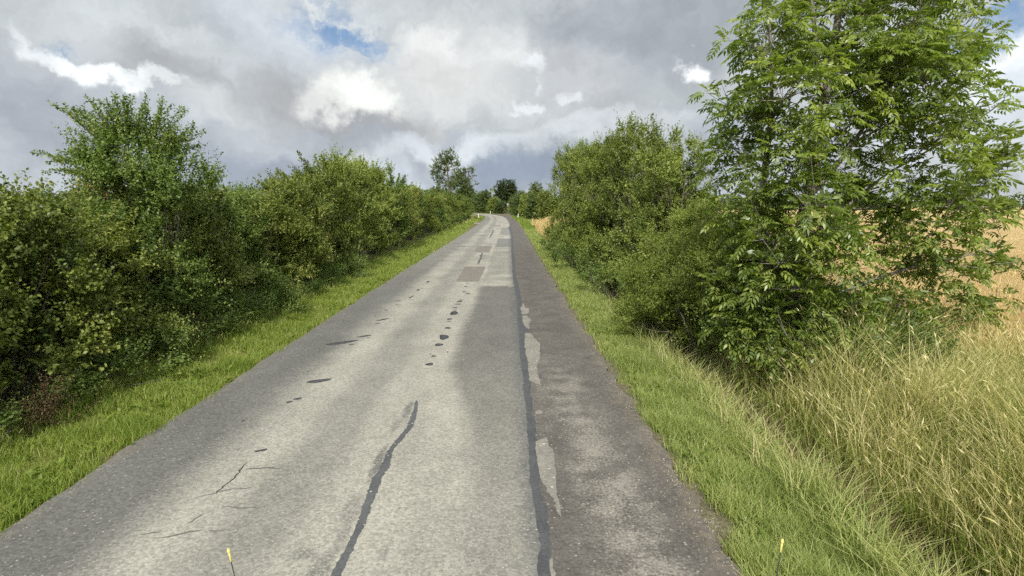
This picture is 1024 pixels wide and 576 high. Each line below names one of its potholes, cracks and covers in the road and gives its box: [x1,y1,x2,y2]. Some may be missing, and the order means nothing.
crack [142,447,281,538]
